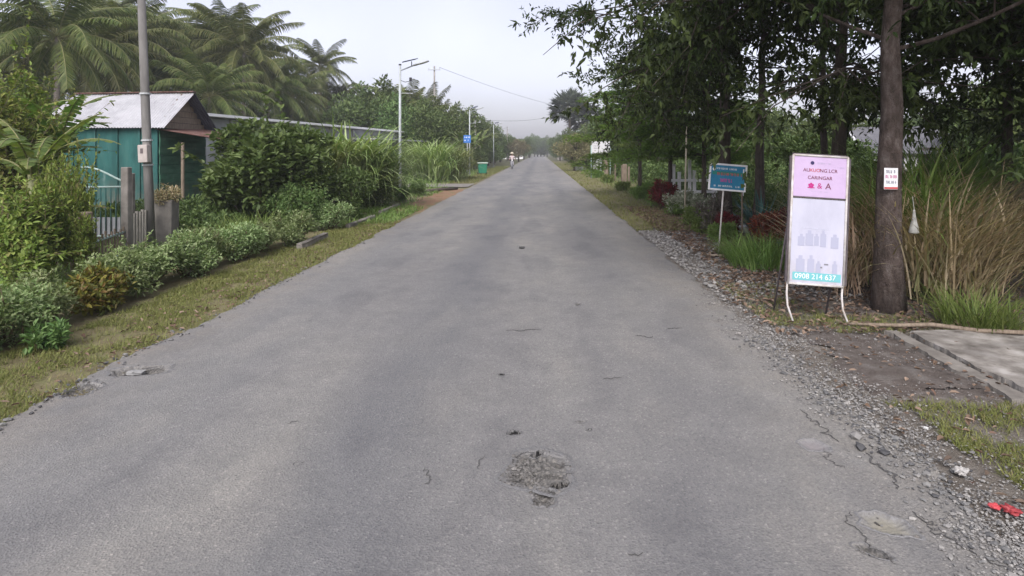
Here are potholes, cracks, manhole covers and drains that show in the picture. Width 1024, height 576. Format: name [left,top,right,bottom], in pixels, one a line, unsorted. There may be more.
crack [845,512,896,564]
pothole [103,364,177,378]
pothole [53,380,108,399]
pothole [529,484,558,509]
crack [867,453,899,489]
pothole [494,446,578,498]
crack [802,411,845,468]
